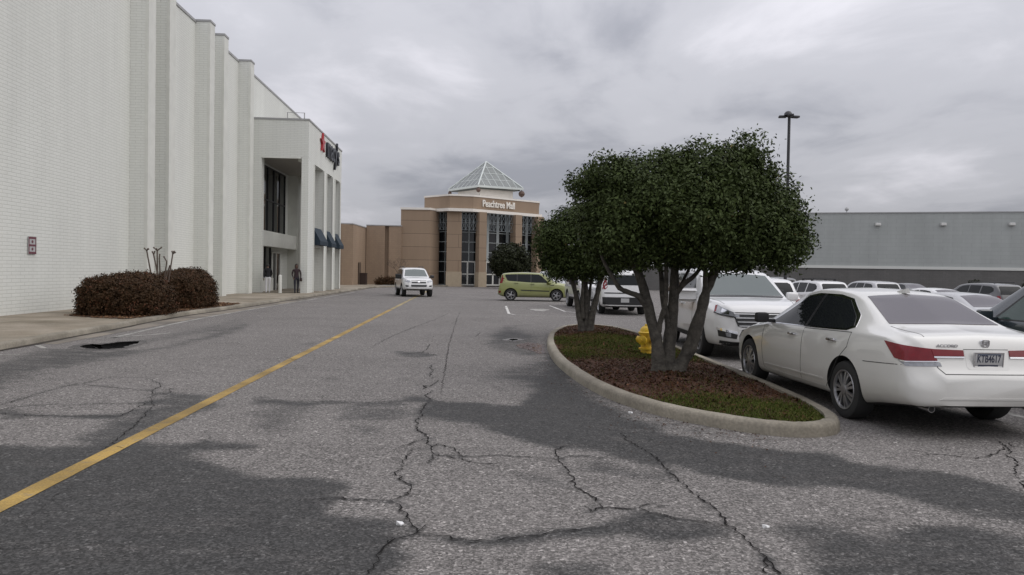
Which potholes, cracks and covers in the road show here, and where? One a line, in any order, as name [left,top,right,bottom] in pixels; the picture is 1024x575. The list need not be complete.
crack [1,377,172,448]
crack [917,440,1024,487]
pothole [68,340,146,350]
crack [296,364,782,574]
